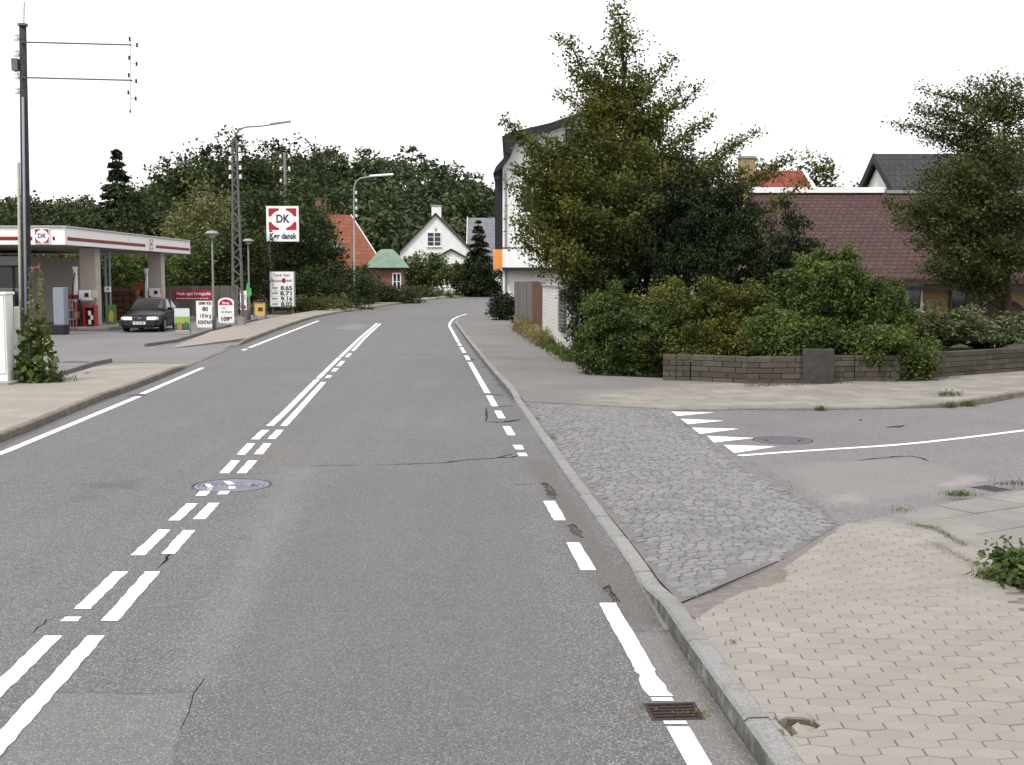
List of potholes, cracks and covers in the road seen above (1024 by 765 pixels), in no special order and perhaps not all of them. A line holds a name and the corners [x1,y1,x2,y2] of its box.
manhole cover [752,436,814,445]
pothole [541,482,557,499]
drain grate [643,702,706,721]
crack [386,451,525,465]
pothole [567,524,583,538]
pothole [778,719,820,736]
manhole cover [191,478,273,492]
crack [179,676,206,732]
pothole [603,585,620,602]
crack [483,380,519,423]
